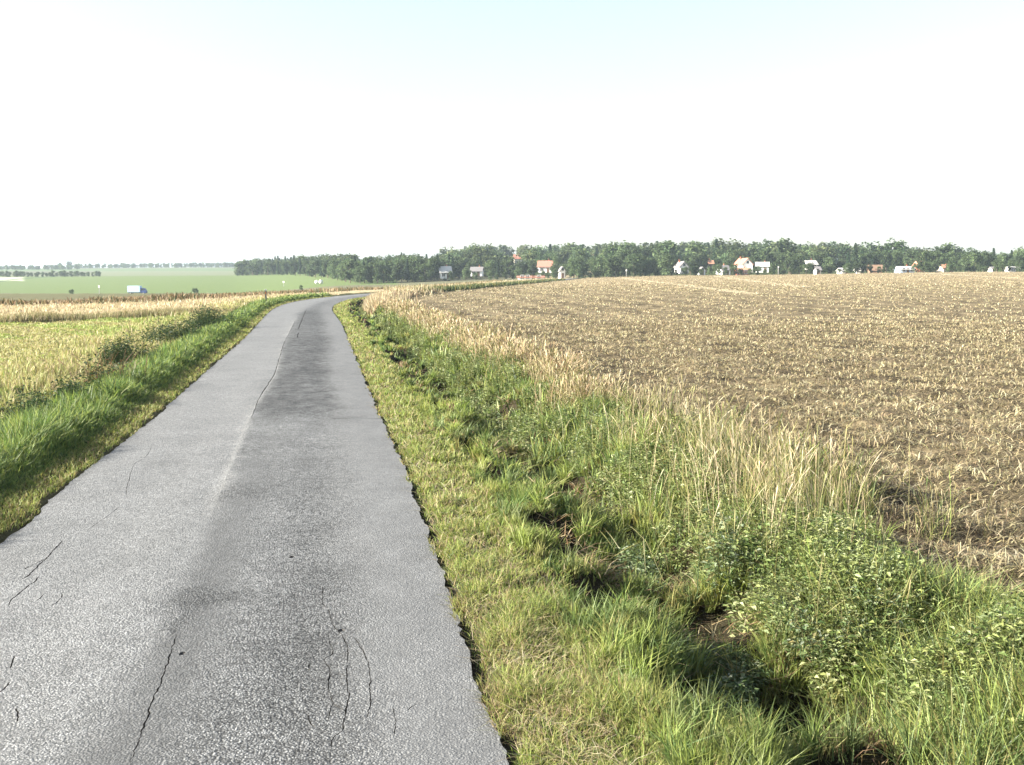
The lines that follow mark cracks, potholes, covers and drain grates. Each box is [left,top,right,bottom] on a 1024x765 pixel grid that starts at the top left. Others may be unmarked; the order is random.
crack [9,540,63,605]
crack [307,586,372,753]
crack [0,655,19,721]
